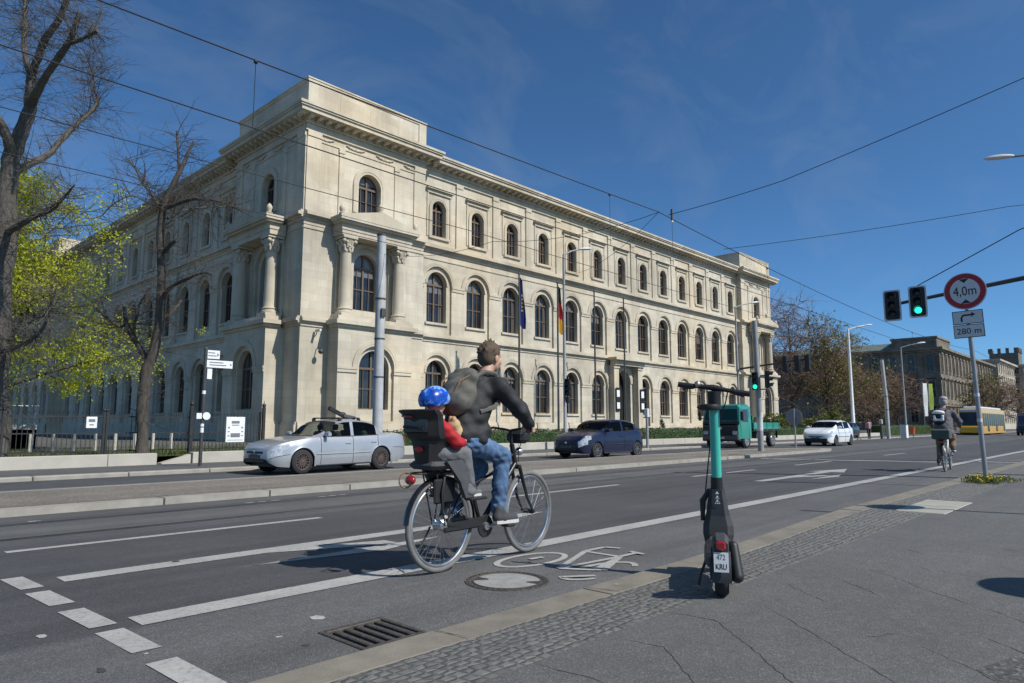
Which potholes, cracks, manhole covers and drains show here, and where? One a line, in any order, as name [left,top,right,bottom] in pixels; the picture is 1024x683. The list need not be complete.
manhole cover [465,571,549,591]
drain grate [318,617,427,651]
crack [619,637,694,683]
crack [669,612,793,683]
crack [767,607,894,682]
